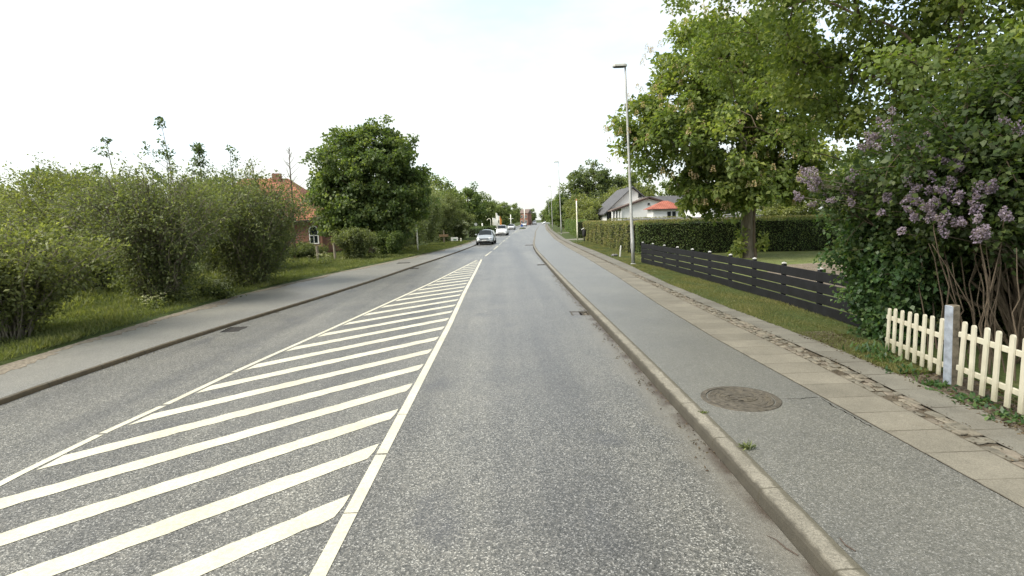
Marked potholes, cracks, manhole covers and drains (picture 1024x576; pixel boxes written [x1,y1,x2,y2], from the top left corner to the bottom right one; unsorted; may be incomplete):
manhole cover [700,386,782,412]
